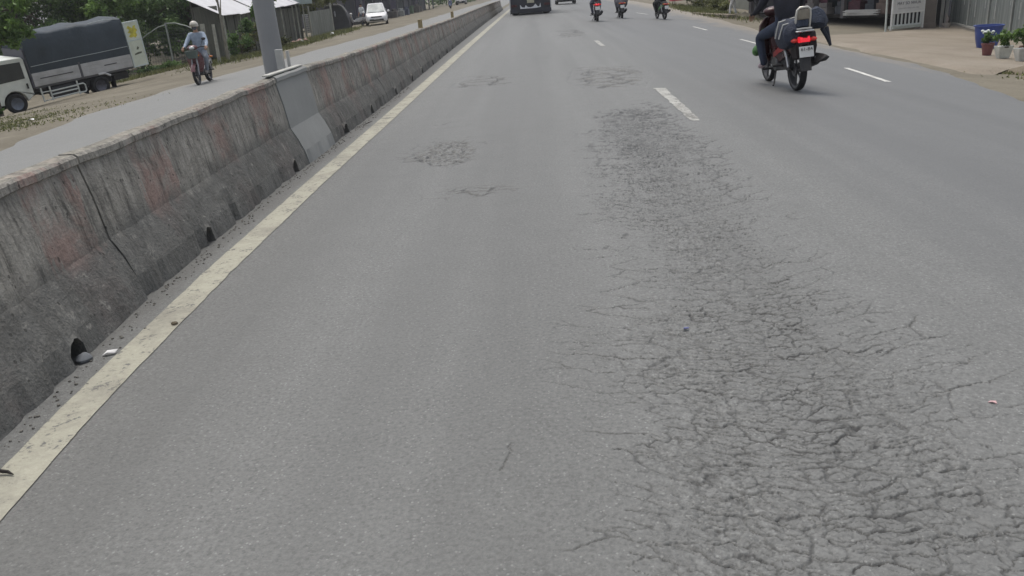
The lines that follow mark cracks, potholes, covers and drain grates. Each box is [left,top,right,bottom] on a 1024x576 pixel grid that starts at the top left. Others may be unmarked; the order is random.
crack [359,66,1024,576]
